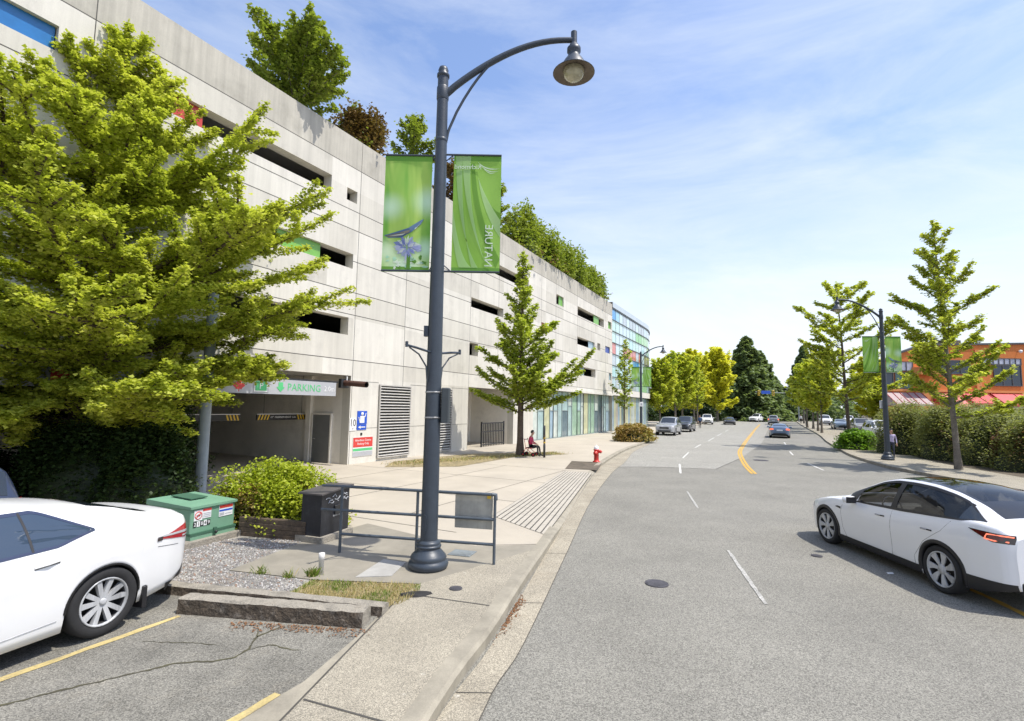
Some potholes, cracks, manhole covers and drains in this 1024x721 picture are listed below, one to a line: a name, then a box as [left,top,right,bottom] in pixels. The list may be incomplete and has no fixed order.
crack [0,627,292,706]
manhole cover [645,579,669,588]
